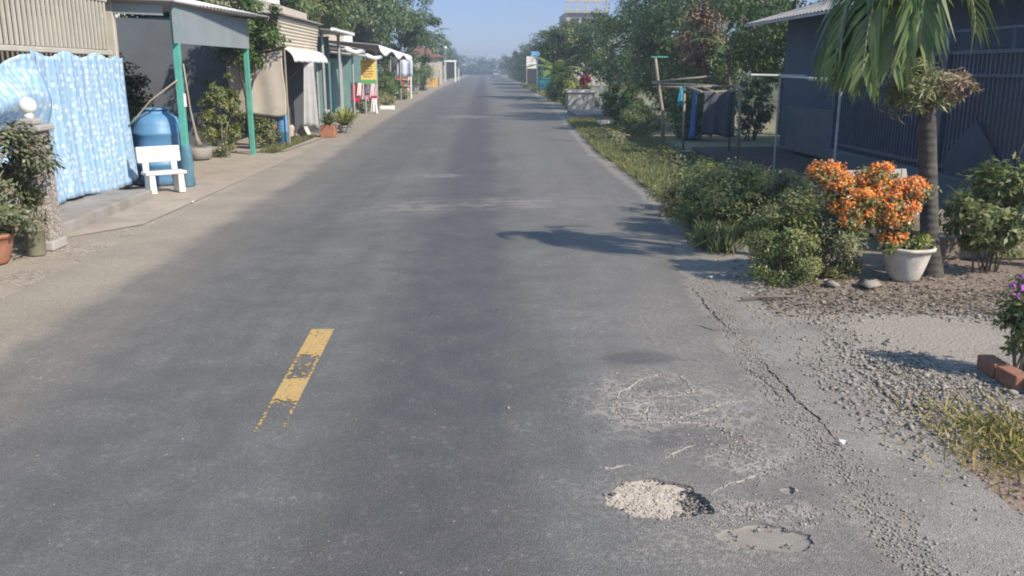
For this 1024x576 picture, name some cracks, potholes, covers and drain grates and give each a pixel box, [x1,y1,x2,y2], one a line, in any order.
crack [692,290,736,335]
crack [744,357,836,440]
pothole [602,476,715,520]
crack [594,360,742,458]
